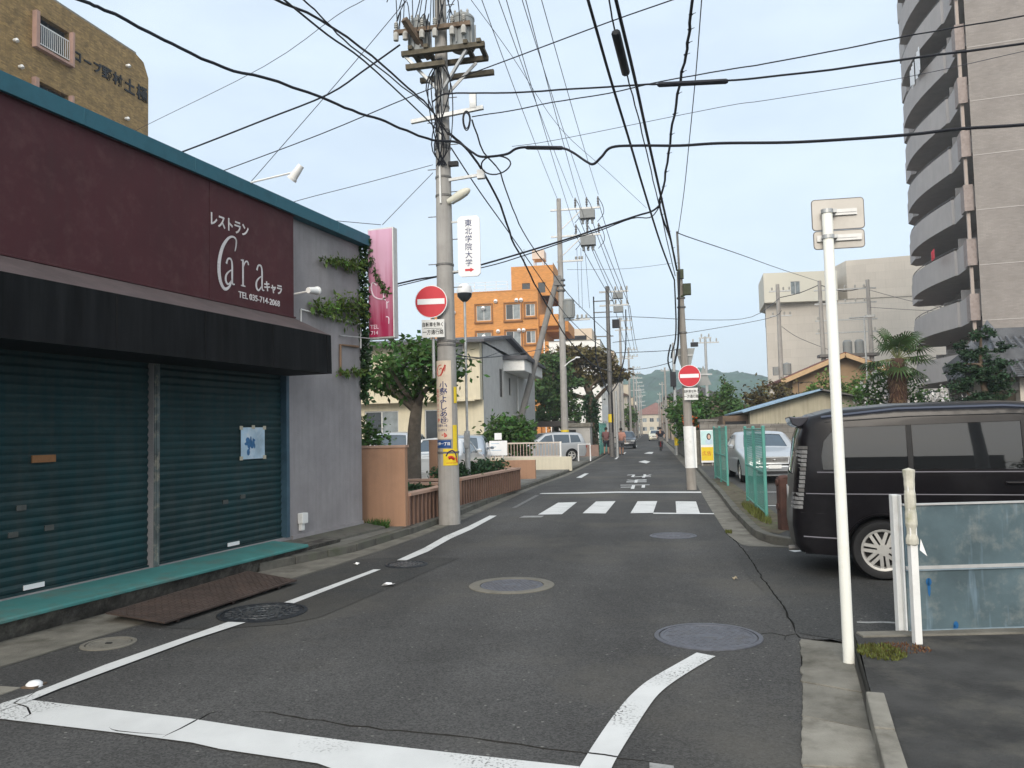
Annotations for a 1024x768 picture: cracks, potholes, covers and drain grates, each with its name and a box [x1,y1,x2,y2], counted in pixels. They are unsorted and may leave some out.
manhole cover [654,623,764,651]
manhole cover [216,602,308,623]
crack [257,701,661,764]
manhole cover [79,636,137,651]
manhole cover [469,577,554,594]
manhole cover [385,560,428,568]
crack [761,633,839,643]
